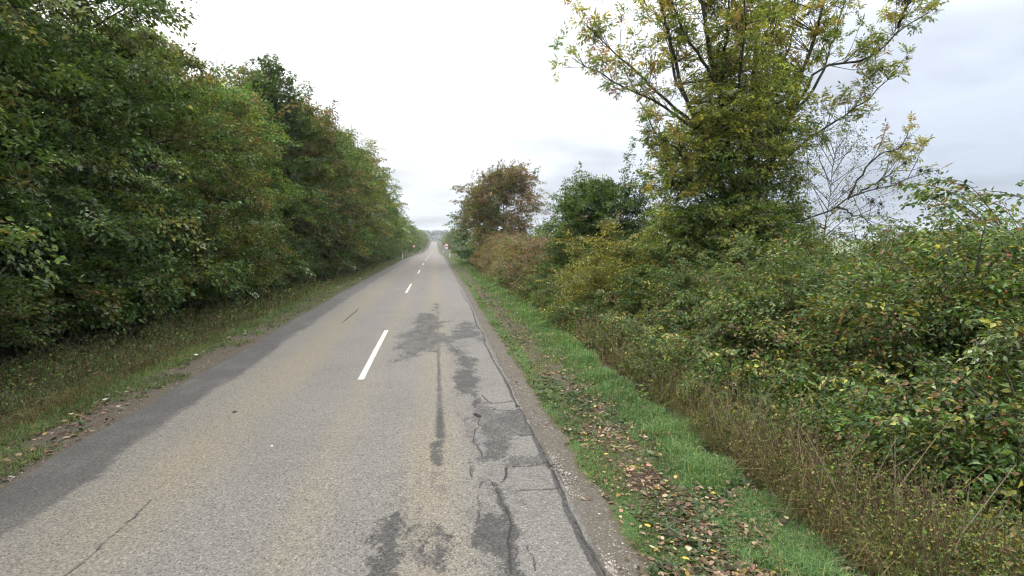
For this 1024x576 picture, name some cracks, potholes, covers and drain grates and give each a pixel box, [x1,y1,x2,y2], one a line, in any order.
crack [452,299,607,576]
